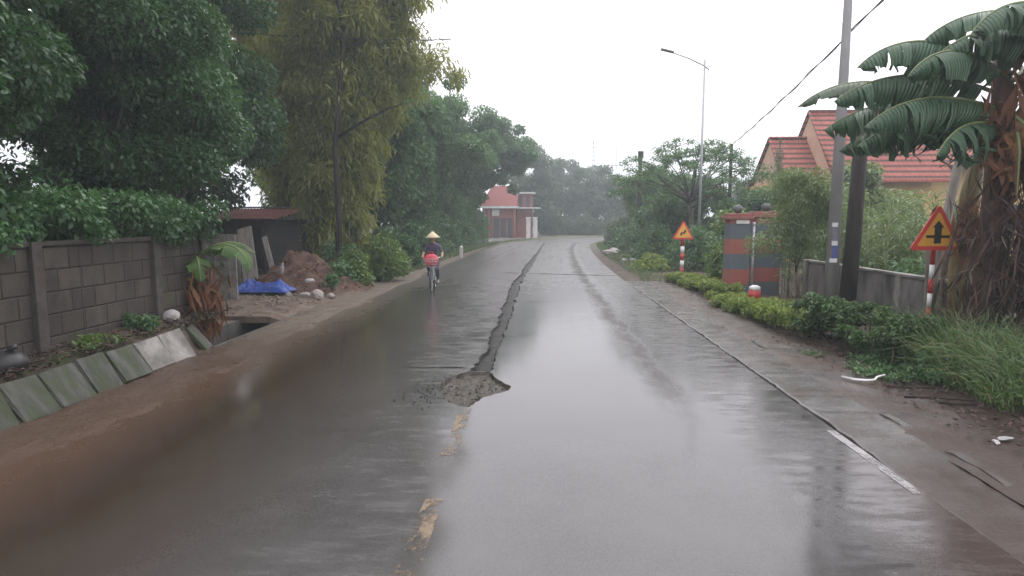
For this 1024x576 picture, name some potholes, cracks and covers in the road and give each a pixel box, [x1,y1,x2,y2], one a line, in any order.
pothole [392,371,512,415]
